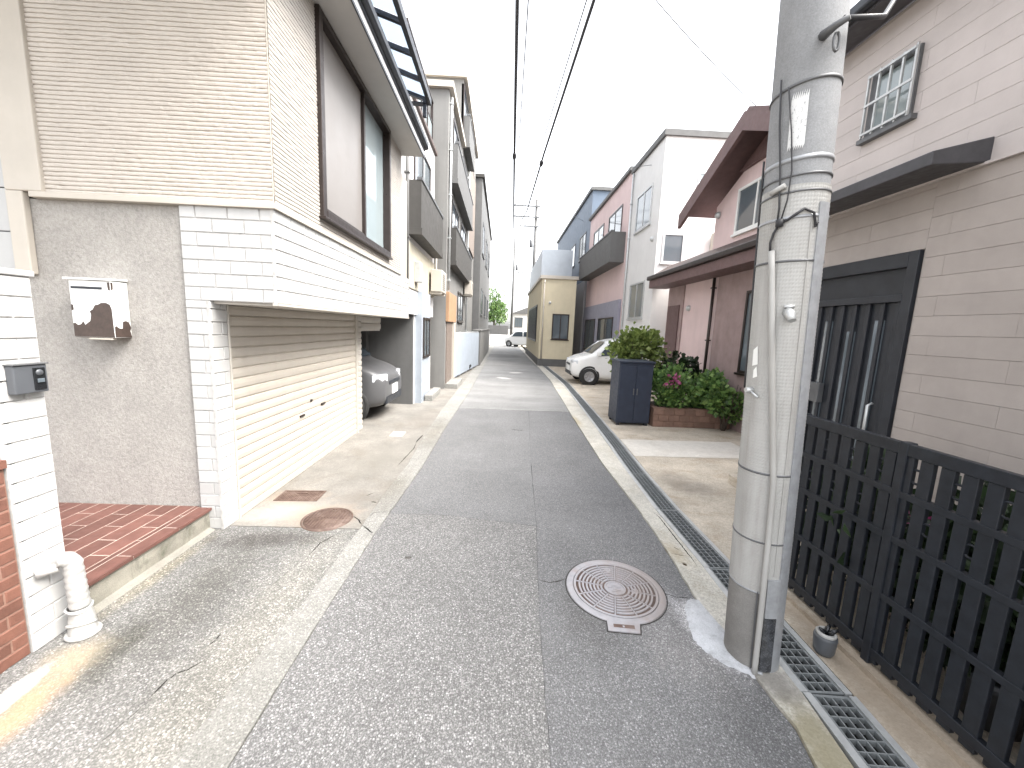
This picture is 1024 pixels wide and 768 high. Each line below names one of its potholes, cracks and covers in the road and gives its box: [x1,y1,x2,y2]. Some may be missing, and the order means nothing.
crack [90,635,220,748]
manhole cover [300,507,353,532]
manhole cover [565,560,668,635]
